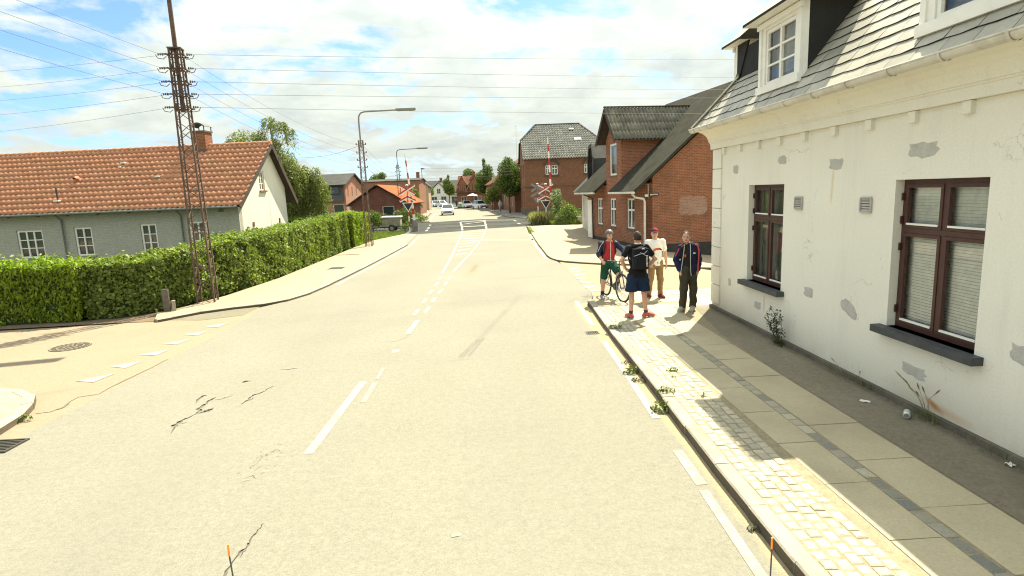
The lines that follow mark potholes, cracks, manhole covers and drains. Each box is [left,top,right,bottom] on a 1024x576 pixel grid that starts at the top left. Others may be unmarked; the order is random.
crack [170,368,297,434]
drain grate [0,438,30,453]
crack [223,524,262,576]
manhole cover [48,342,92,352]
